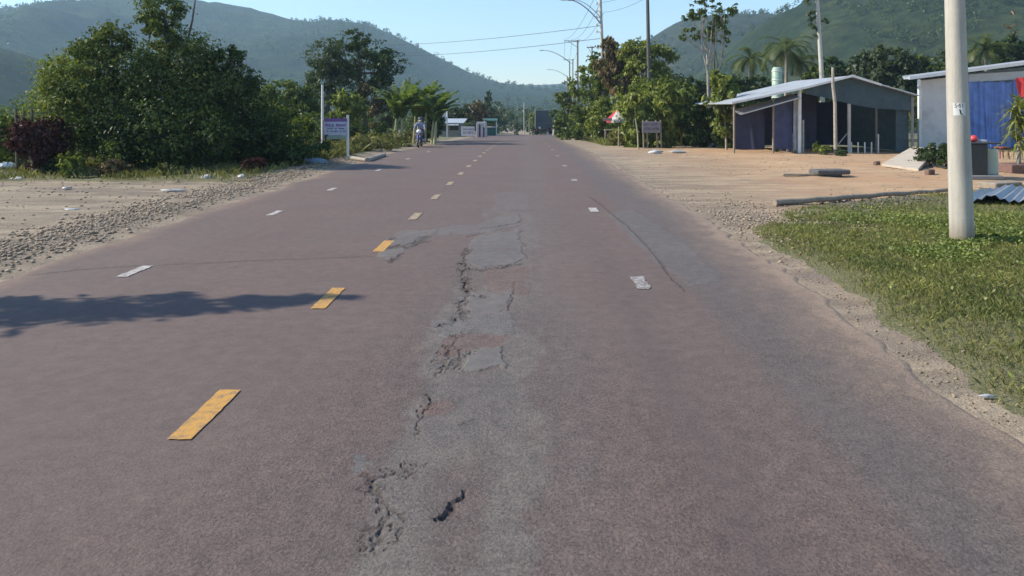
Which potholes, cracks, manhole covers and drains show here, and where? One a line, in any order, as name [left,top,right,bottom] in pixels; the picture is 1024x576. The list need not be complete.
crack [413,408,434,437]
pothole [433,490,467,522]
crack [429,210,523,377]
crack [354,461,428,556]
